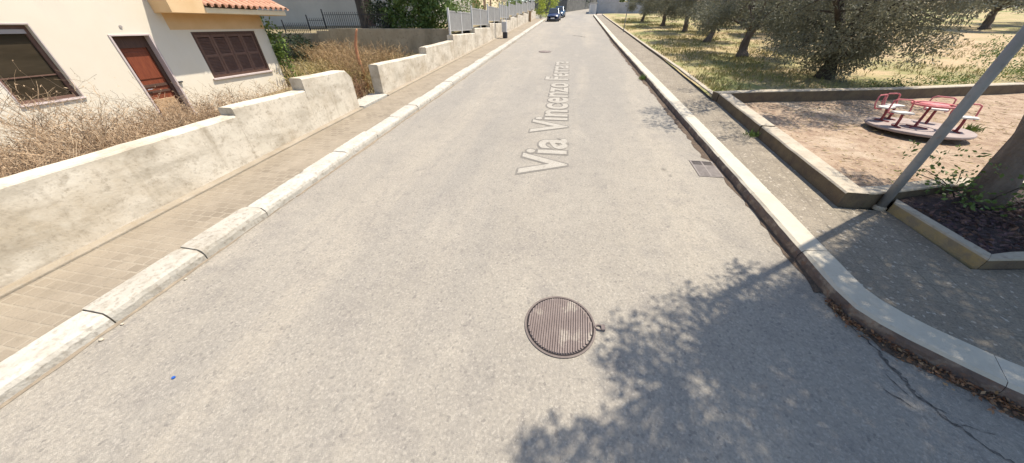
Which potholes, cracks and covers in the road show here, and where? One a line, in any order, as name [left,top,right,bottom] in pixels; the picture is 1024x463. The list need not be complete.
manhole cover [525,296,605,359]
crack [848,323,1015,463]
drain grate [689,160,725,178]
